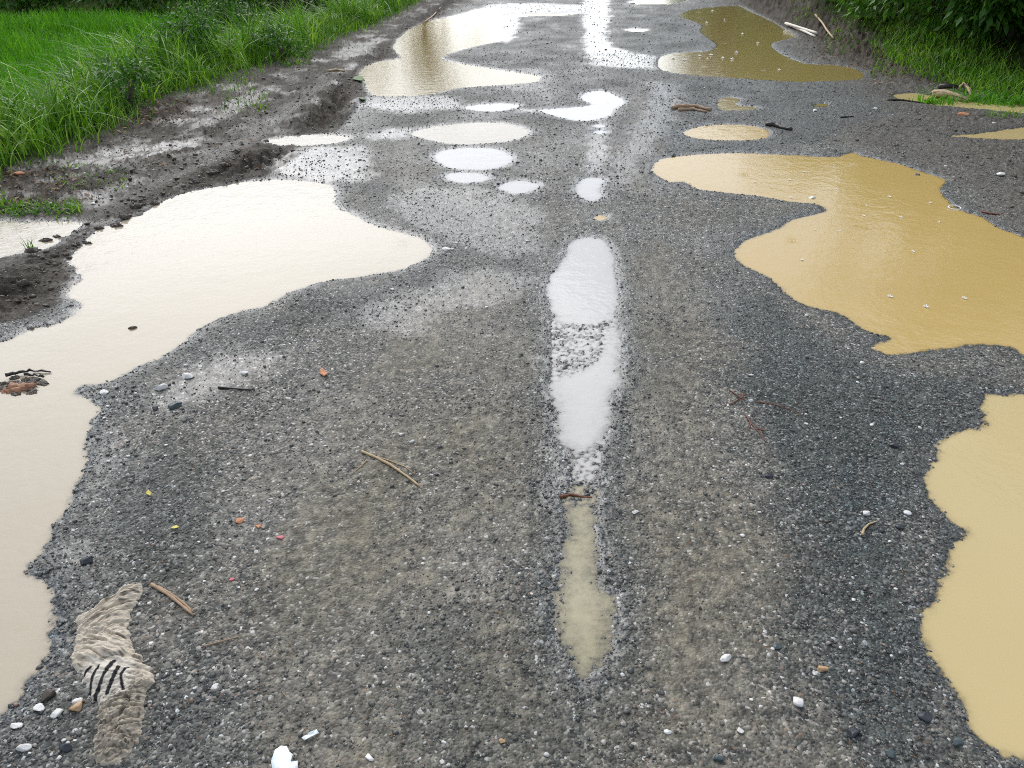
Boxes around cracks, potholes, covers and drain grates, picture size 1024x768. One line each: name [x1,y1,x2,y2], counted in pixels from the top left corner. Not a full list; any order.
pothole [564,172,618,204]
pothole [526,476,650,710]
pothole [651,4,873,82]
pothole [528,311,643,483]
pothole [675,120,781,142]
pothole [892,380,1024,768]
pothole [0,175,448,747]
pothole [531,88,634,122]
pothole [488,175,551,196]
pothole [353,6,581,97]
pothole [402,119,540,145]
